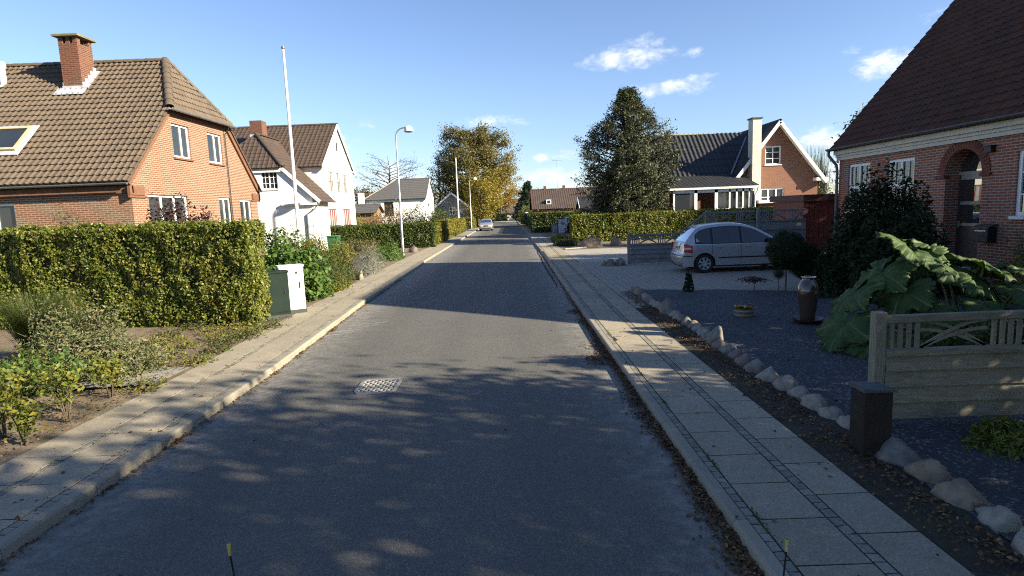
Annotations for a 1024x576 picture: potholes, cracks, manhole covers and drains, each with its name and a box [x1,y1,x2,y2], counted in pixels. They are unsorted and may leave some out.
drain grate [354,378,402,394]
